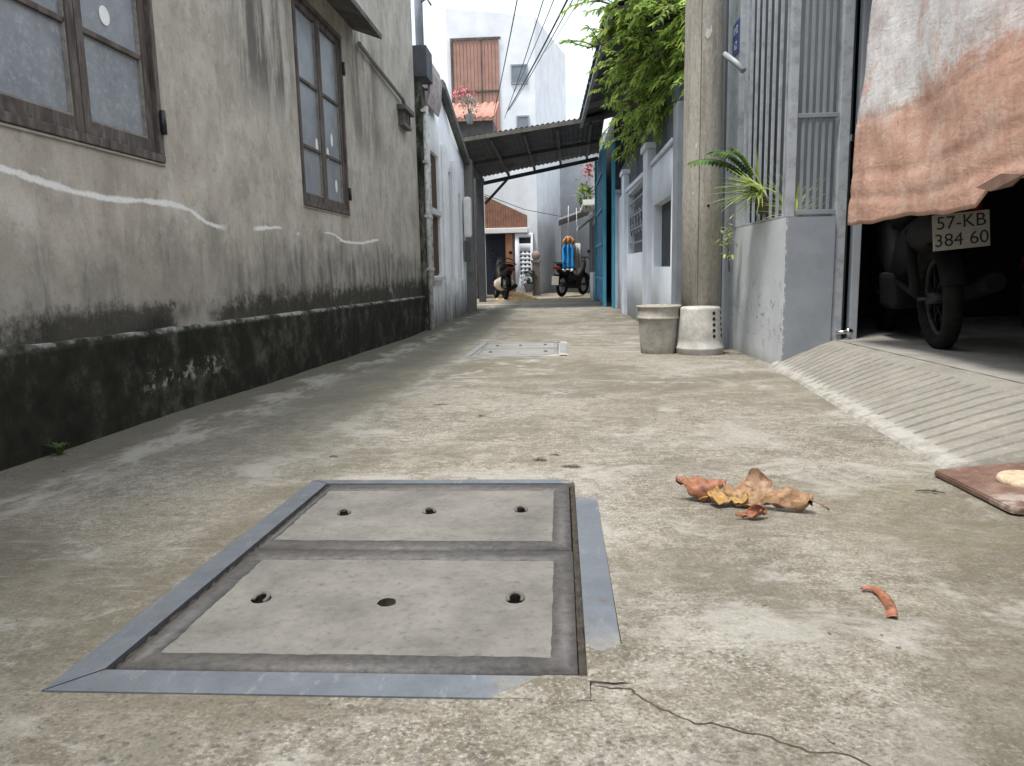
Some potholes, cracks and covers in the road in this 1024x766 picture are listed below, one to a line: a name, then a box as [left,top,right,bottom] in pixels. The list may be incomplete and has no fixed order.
manhole cover [462,341,568,357]
manhole cover [42,478,640,704]
crack [597,686,871,766]
